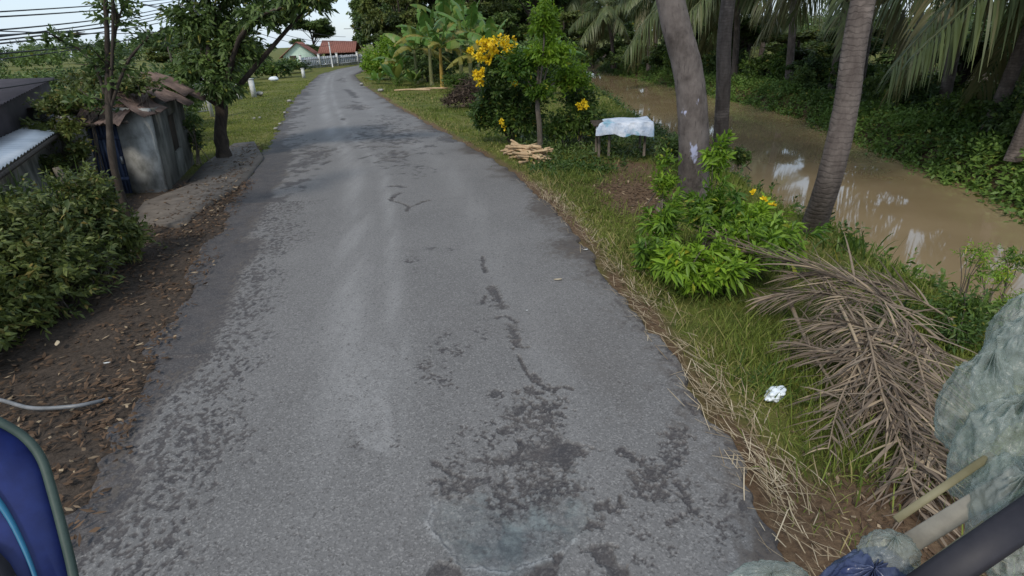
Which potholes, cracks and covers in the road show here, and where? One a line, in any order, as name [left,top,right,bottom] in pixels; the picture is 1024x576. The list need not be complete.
crack [478,255,536,383]
crack [385,184,433,212]
